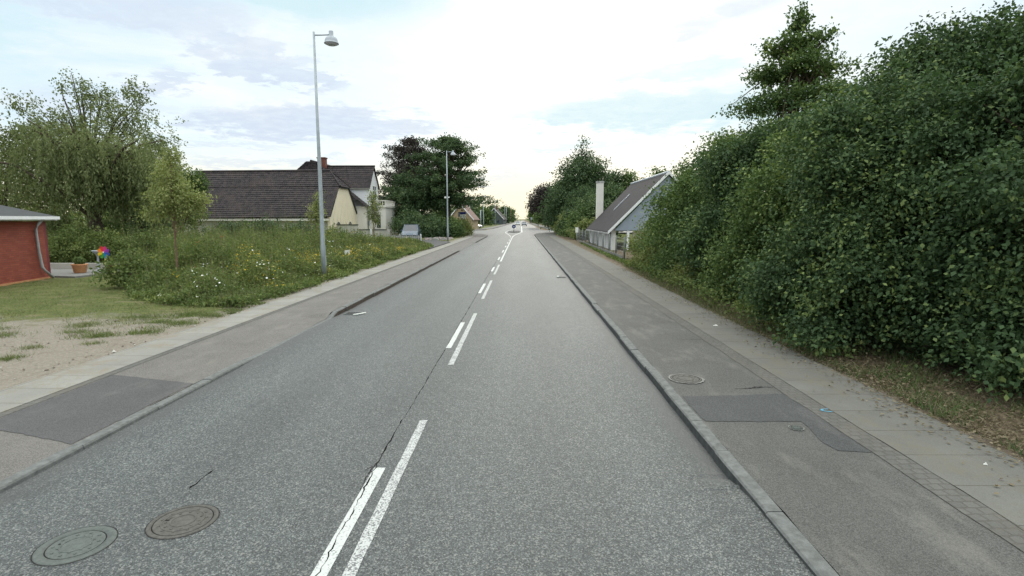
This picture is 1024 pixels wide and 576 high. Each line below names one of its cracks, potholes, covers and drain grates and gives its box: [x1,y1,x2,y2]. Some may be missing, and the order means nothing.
manhole cover [668,374,705,384]
manhole cover [145,504,220,539]
manhole cover [31,525,118,566]
